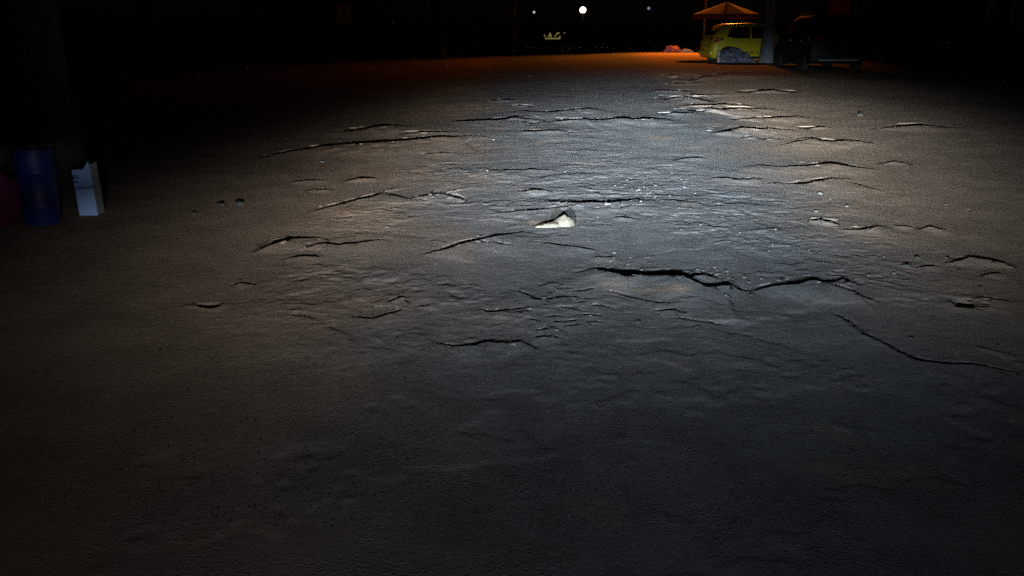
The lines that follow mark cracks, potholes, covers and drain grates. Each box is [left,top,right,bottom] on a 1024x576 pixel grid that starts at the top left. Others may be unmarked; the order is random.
crack [252,72,964,190]
crack [246,165,1024,378]
pothole [932,293,1002,313]
